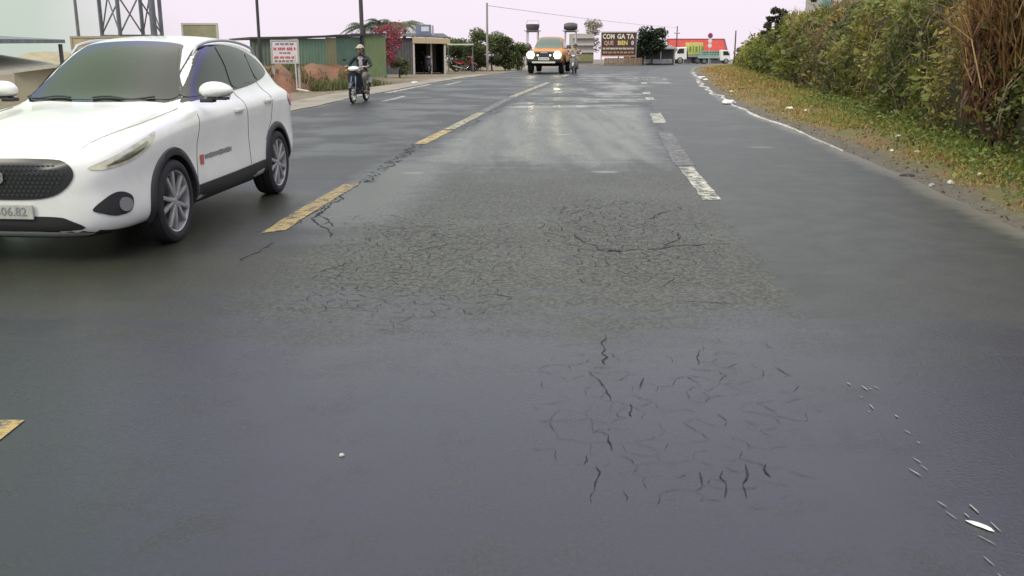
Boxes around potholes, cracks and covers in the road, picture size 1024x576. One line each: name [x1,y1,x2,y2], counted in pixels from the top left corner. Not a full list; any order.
crack [540,200,727,296]
crack [300,192,529,332]
crack [532,335,820,509]
